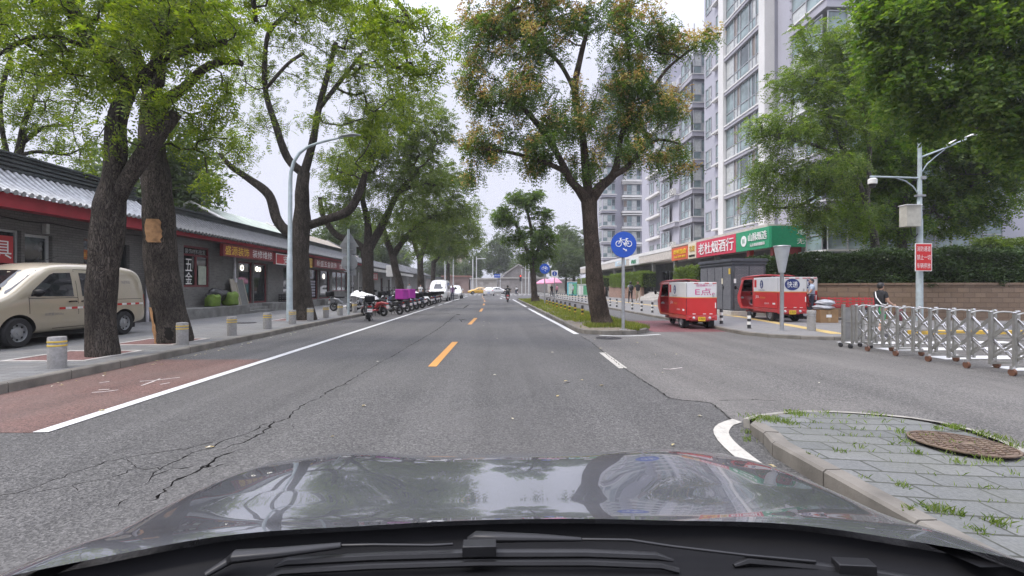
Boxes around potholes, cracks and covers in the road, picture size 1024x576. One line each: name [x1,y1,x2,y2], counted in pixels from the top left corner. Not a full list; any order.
crack [3,314,457,506]
manhole cover [906,430,1024,458]
